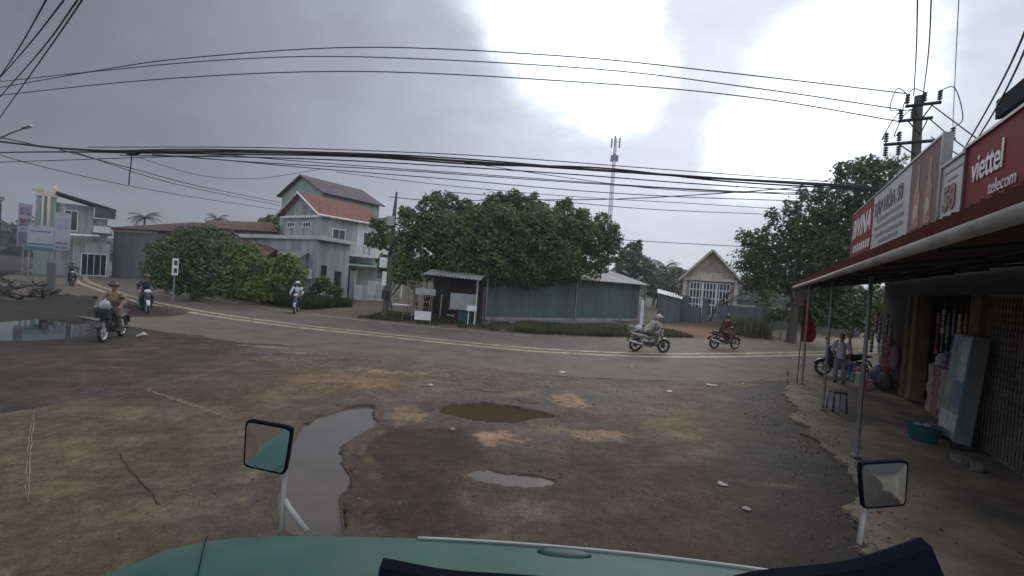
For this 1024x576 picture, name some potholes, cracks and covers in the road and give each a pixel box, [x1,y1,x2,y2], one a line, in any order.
pothole [452,465,571,494]
crack [119,453,159,505]
crack [25,410,35,503]
pothole [267,402,384,537]
pothole [428,400,566,428]
crack [148,388,236,419]
